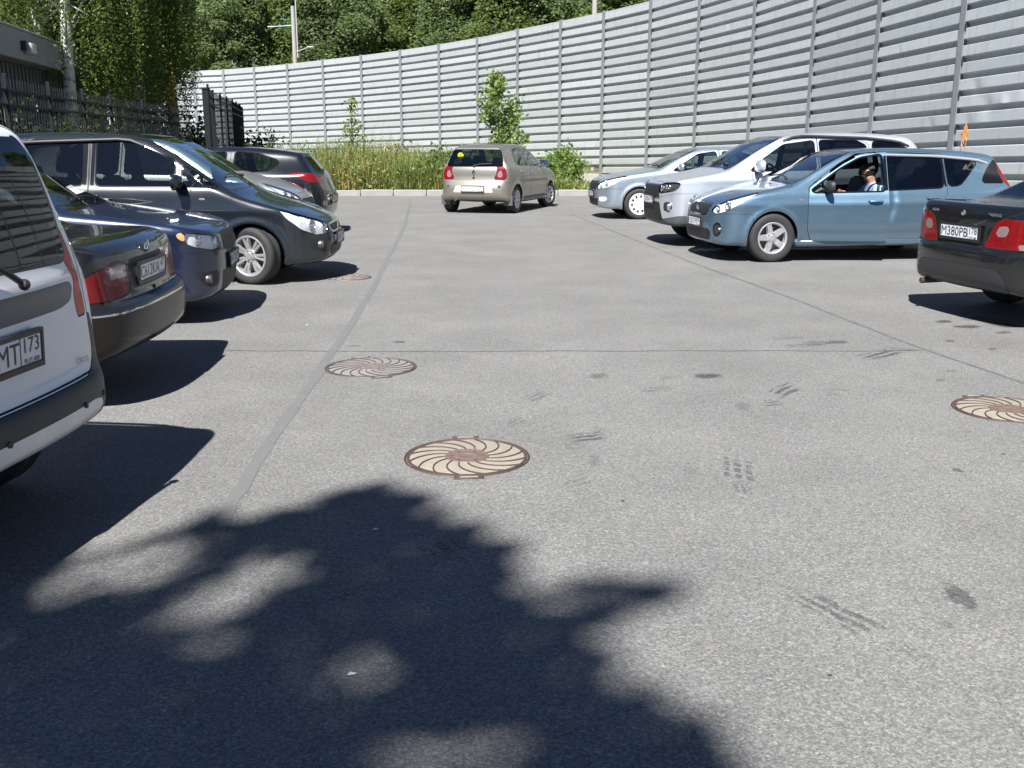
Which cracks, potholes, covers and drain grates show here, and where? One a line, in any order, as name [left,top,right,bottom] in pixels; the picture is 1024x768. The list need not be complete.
manhole cover [325,356,417,379]
manhole cover [404,436,530,480]
manhole cover [951,395,1024,424]
